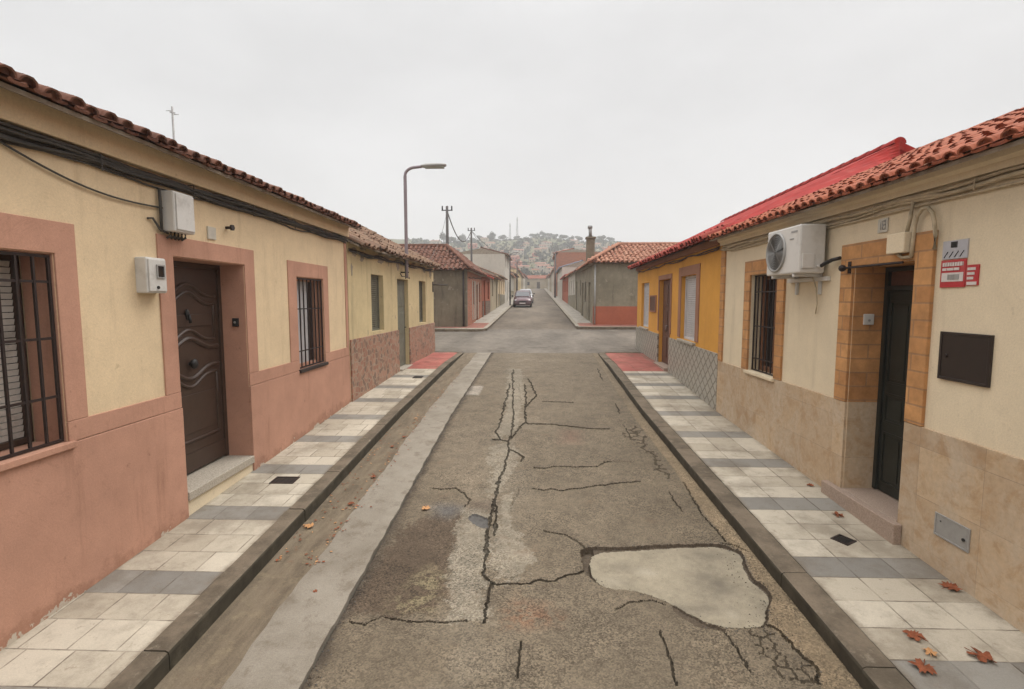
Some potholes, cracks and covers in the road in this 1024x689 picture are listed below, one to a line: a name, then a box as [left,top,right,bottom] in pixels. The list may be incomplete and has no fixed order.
crack [347,369,749,626]
crack [659,630,678,686]
crack [724,624,821,685]
